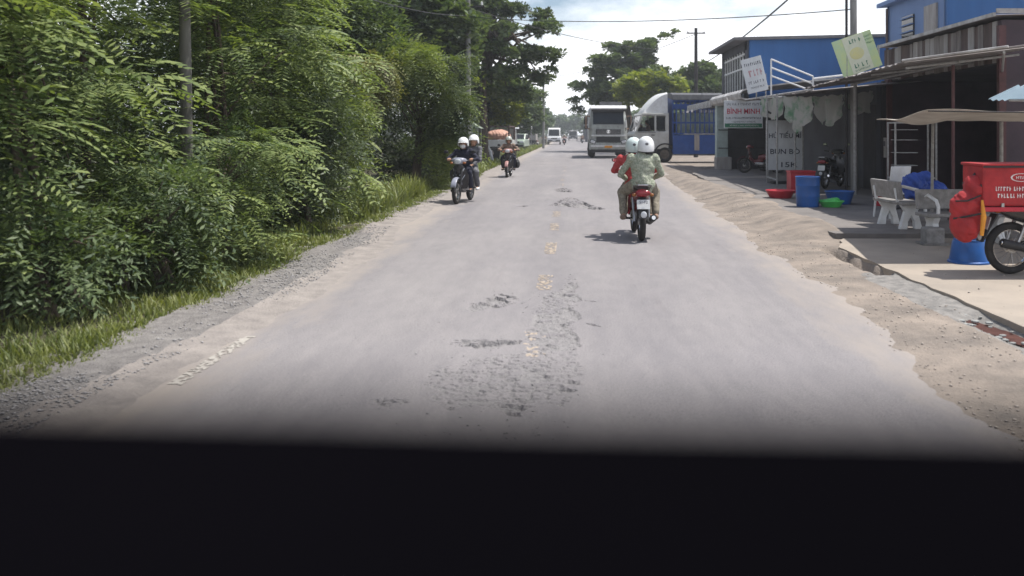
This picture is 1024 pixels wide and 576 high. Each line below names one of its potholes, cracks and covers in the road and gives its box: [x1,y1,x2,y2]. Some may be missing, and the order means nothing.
pothole [460,293,521,313]
pothole [447,338,522,349]
